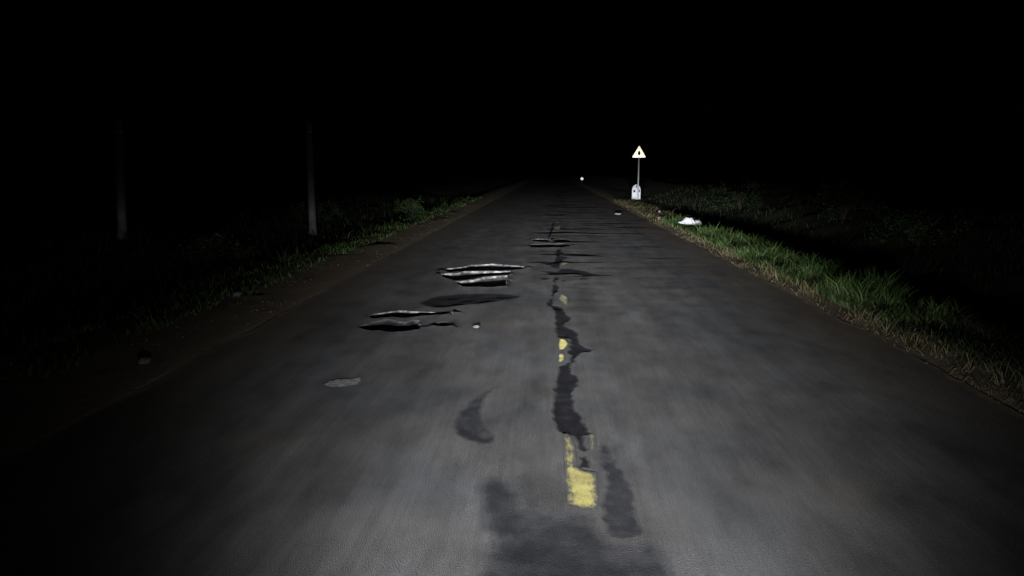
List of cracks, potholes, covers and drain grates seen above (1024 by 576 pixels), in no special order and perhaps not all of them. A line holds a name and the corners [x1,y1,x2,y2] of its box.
pothole [443,264,527,272]
pothole [368,310,453,319]
pothole [358,319,423,332]
pothole [441,271,511,281]
pothole [455,276,508,287]
crack [472,223,684,576]
